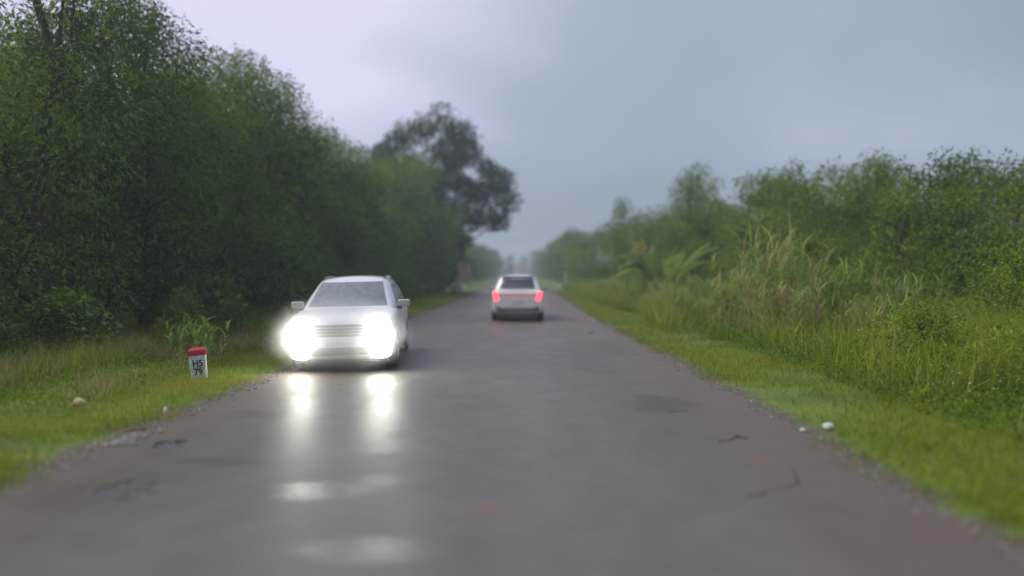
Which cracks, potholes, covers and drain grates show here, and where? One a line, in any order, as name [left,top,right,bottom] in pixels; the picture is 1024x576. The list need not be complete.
crack [746,469,800,498]
pothole [92,478,161,503]
pothole [151,440,188,449]
